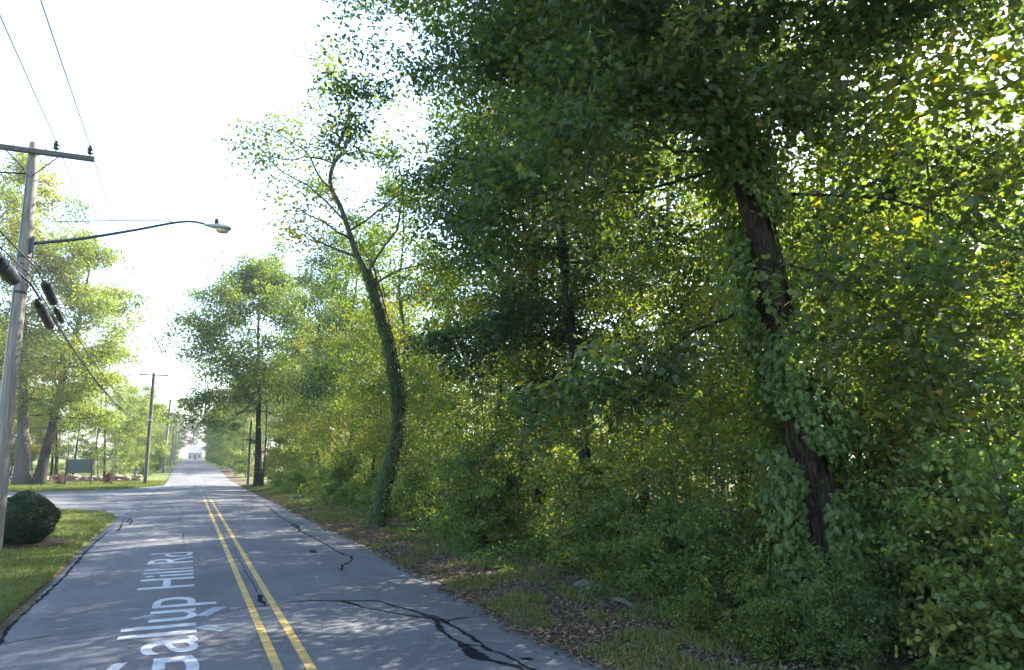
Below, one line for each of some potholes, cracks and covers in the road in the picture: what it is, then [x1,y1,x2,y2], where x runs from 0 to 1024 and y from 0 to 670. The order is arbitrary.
crack [0,518,133,645]
